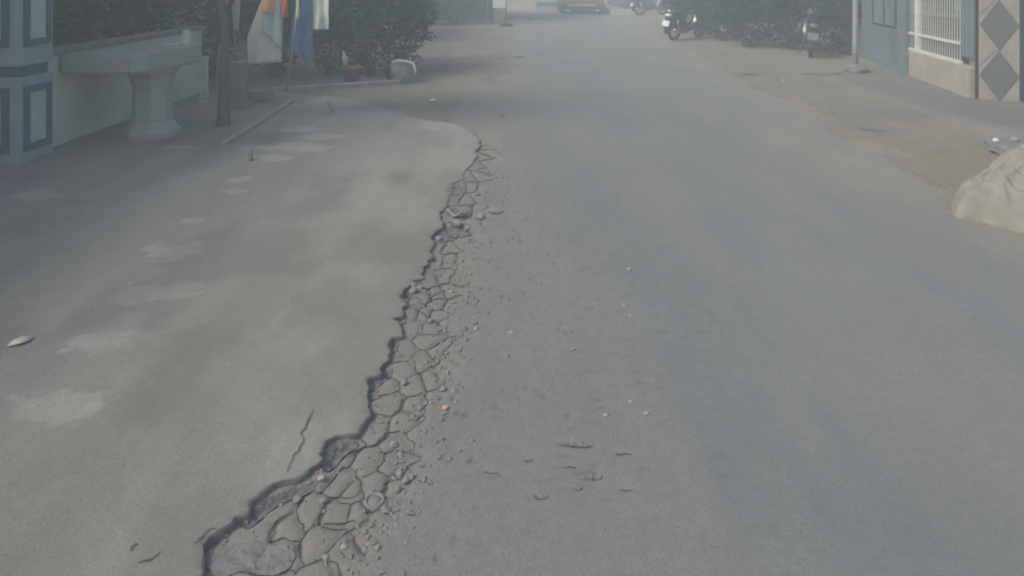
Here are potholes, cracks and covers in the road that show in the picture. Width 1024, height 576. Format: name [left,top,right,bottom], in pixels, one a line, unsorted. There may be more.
crack [235,135,502,576]
